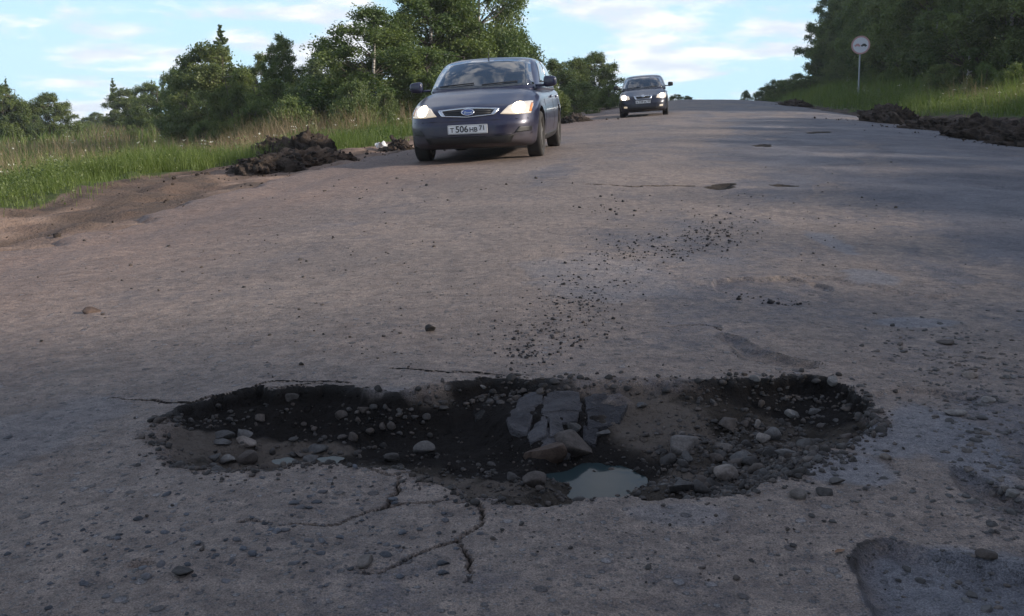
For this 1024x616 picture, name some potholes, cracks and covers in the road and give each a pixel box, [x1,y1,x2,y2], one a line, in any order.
pothole [713,332,828,369]
pothole [945,466,1024,516]
pothole [134,374,879,508]
crack [242,468,487,583]
crack [113,380,351,407]
